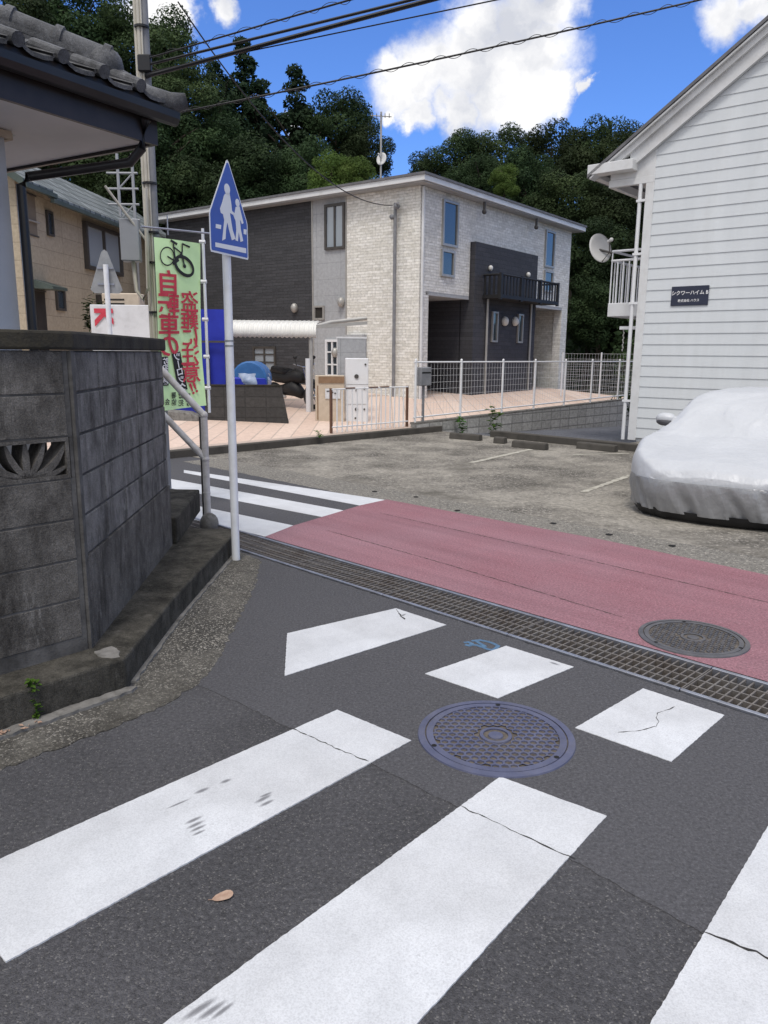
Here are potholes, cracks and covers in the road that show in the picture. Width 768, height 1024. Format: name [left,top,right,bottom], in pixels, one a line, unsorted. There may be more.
manhole cover [638,619,751,658]
manhole cover [418,700,576,778]
drain grate [507,619,712,692]
crack [291,728,368,761]
crack [462,806,574,858]
crack [703,931,768,959]
